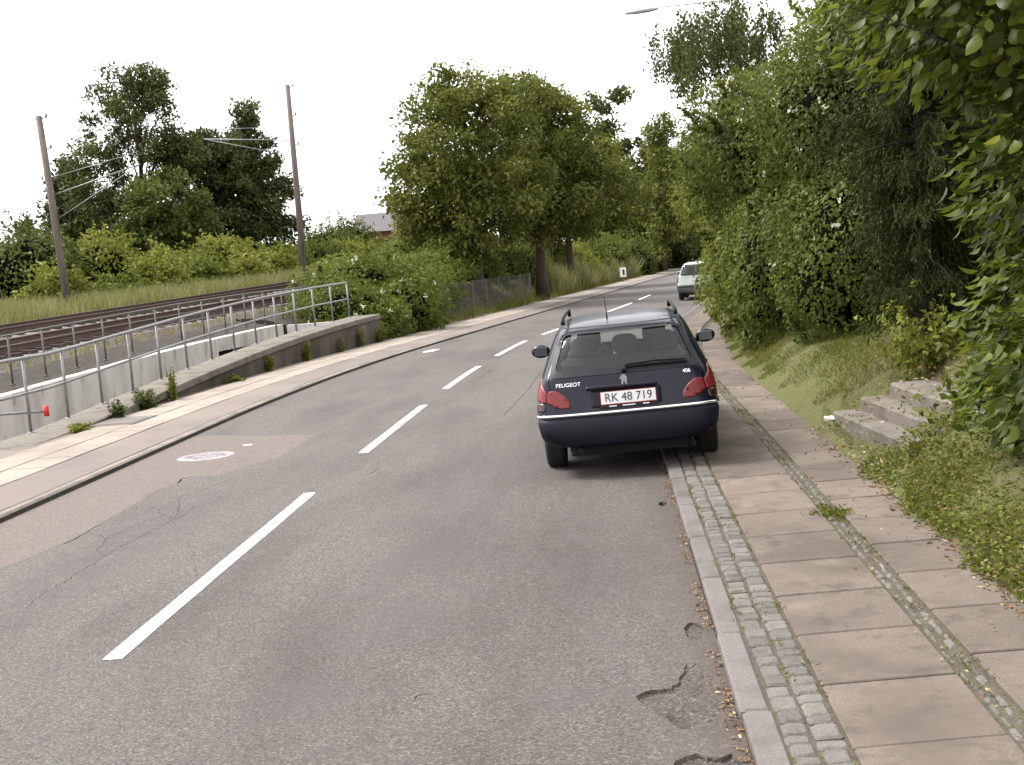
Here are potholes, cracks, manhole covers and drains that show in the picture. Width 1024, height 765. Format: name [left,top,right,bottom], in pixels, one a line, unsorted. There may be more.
pothole [684,622,704,640]
manhole cover [177,451,234,461]
crack [26,477,233,608]
pothole [674,753,743,765]
pothole [636,663,721,730]
